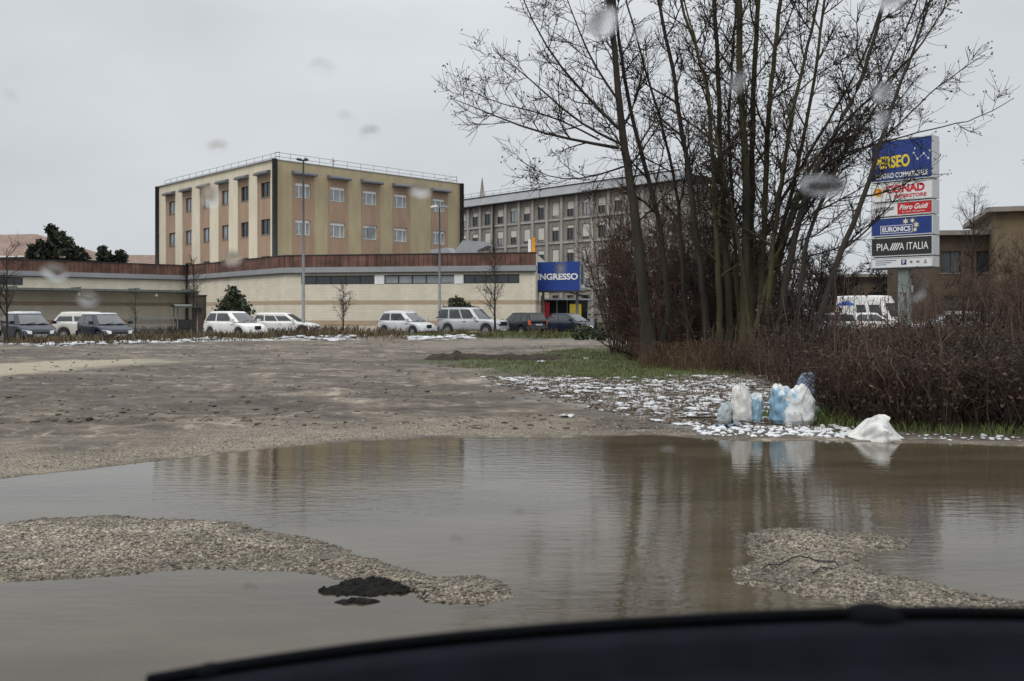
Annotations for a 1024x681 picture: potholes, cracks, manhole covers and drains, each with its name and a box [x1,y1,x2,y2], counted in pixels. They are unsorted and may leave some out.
pothole [318,575,414,605]
